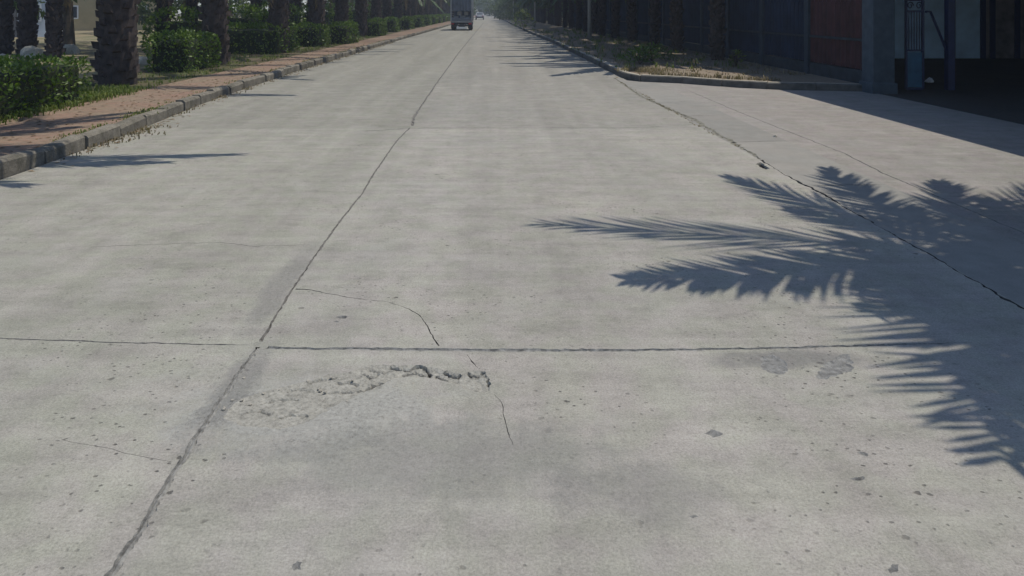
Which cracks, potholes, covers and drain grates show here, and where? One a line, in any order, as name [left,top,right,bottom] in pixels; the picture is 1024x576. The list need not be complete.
pothole [224,364,491,429]
crack [296,289,439,346]
